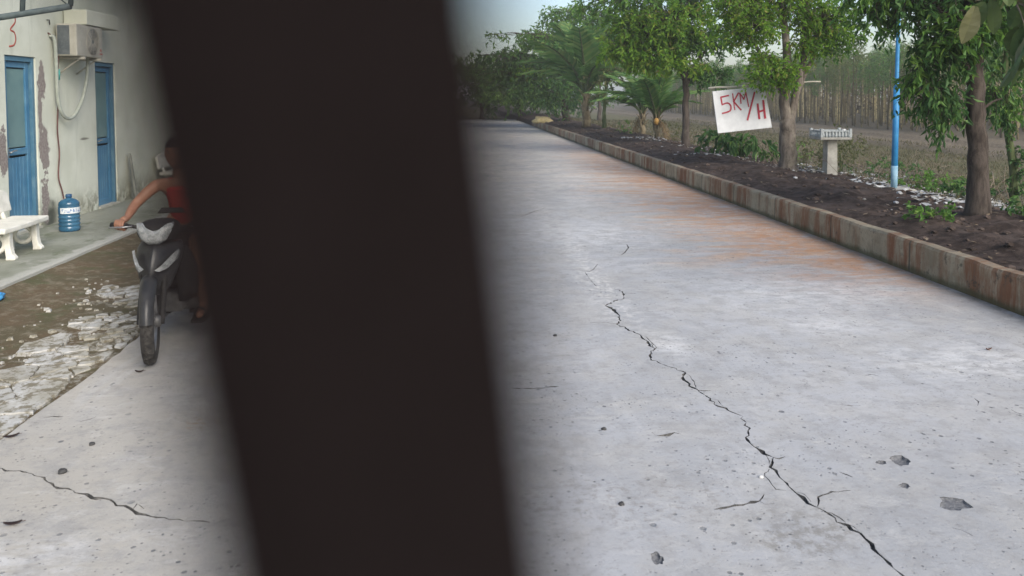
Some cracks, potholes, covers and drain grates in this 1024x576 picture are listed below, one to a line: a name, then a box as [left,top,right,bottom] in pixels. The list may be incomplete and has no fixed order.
crack [606,290,904,576]
crack [0,284,139,438]
crack [0,468,182,521]
